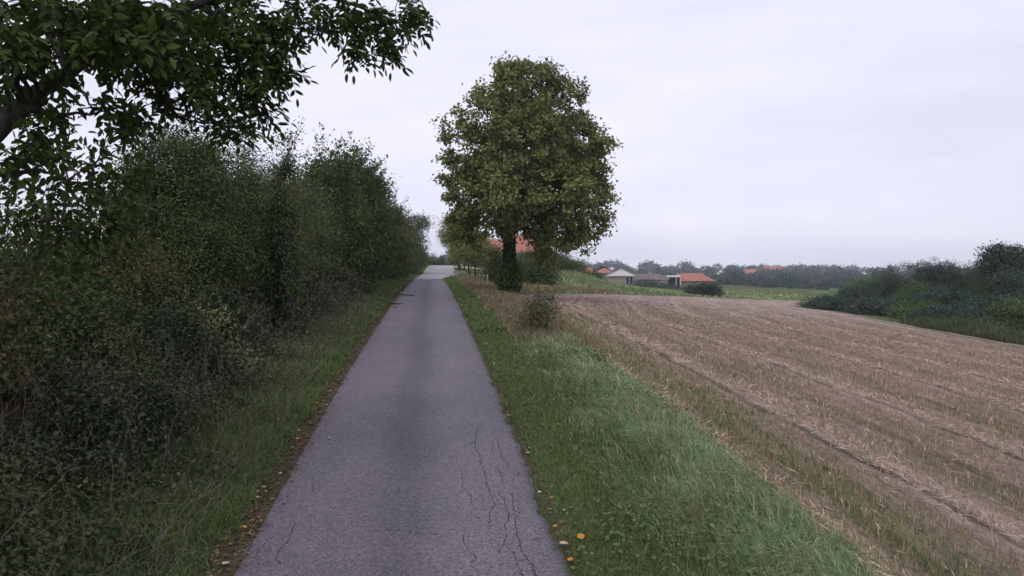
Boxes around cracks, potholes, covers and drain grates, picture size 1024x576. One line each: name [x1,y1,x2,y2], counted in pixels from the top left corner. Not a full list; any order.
crack [460,415,548,576]
